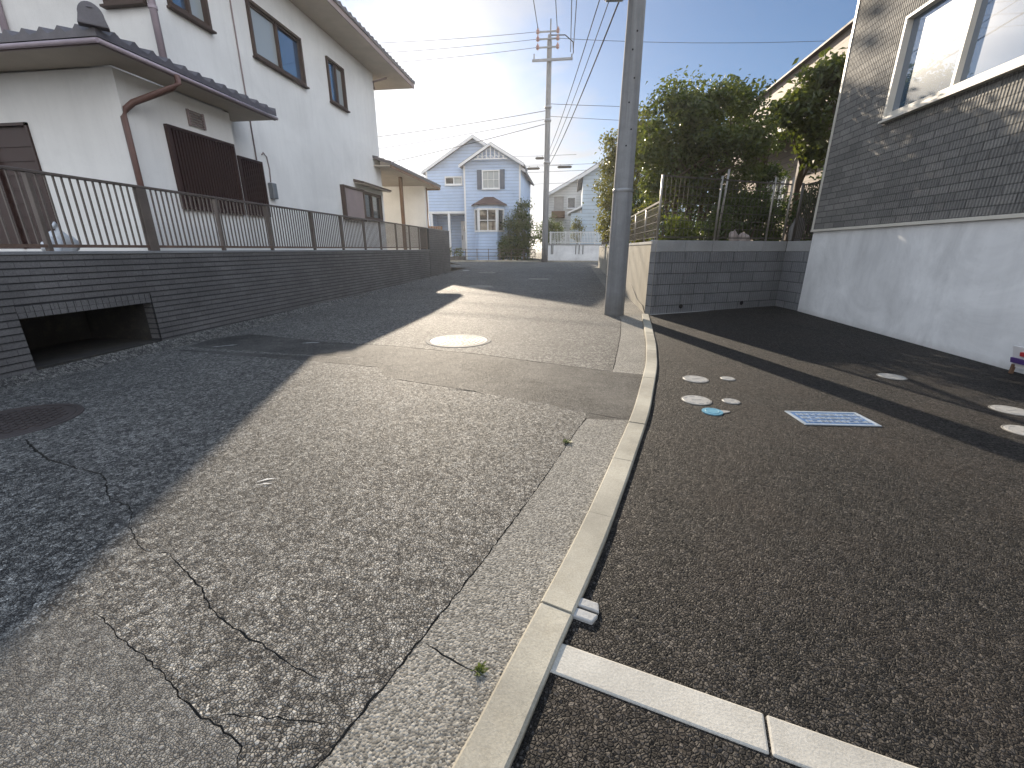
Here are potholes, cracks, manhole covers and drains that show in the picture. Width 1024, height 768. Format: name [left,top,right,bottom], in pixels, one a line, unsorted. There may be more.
crack [423,641,487,677]
utility cover [680,395,713,406]
manhole cover [426,334,491,348]
crack [25,439,340,768]
utility cover [987,405,1024,417]
utility cover [999,425,1024,436]
utility cover [875,373,908,381]
utility cover [682,375,710,383]
manhole cover [0,403,85,440]
utility cover [702,408,730,416]
